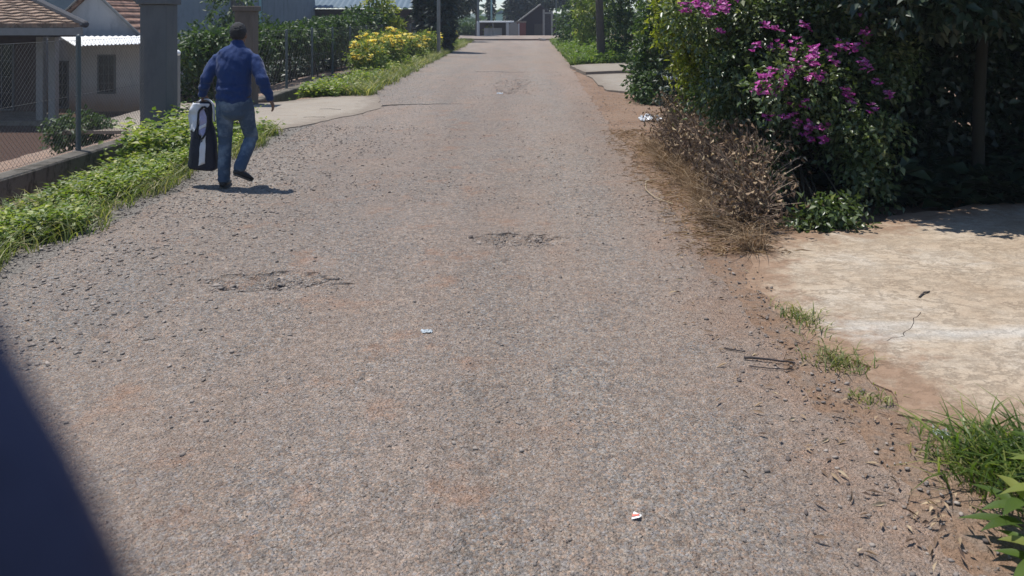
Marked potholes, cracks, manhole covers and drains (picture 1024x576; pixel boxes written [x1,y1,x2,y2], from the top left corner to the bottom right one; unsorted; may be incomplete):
pothole [492,75,539,95]
pothole [468,232,572,250]
pothole [170,267,394,297]
